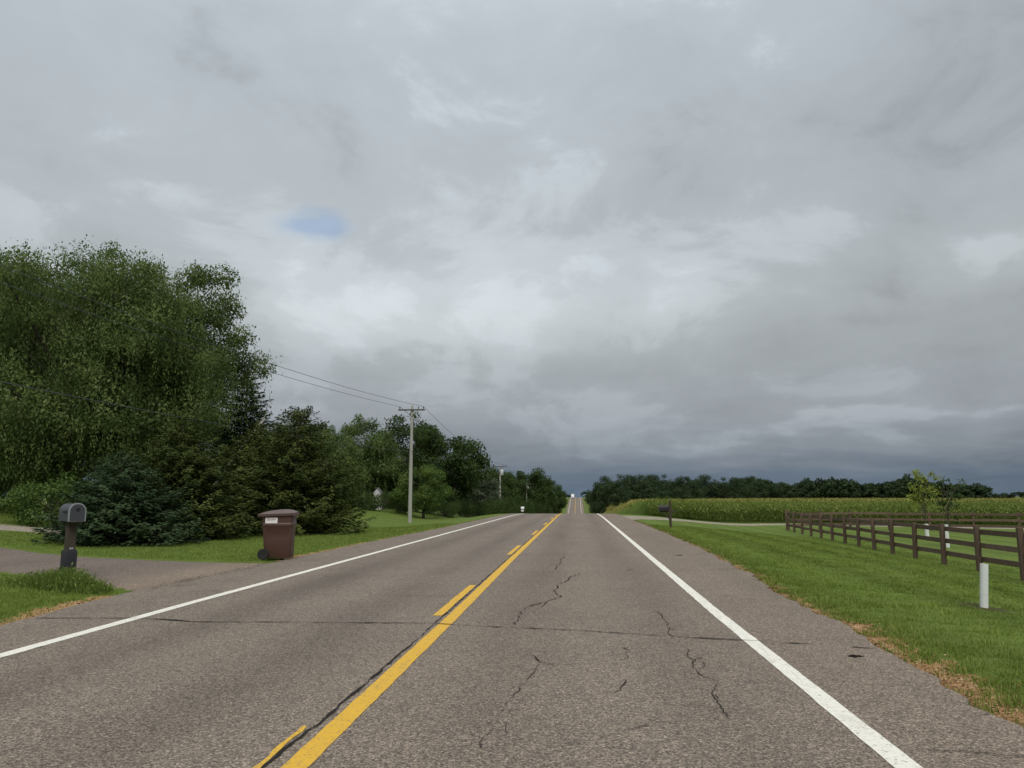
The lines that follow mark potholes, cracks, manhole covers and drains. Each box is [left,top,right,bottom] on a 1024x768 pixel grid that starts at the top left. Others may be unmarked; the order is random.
crack [471,654,552,750]
crack [85,534,875,717]
